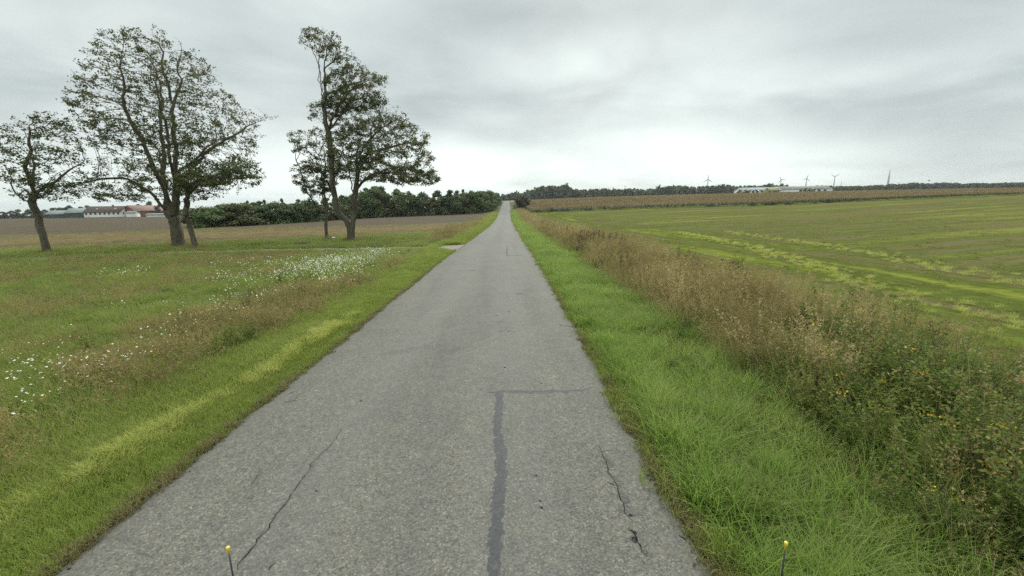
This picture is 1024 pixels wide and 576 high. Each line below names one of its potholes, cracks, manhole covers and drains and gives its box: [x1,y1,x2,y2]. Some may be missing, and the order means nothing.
crack [598,446,645,555]
crack [237,432,340,565]
